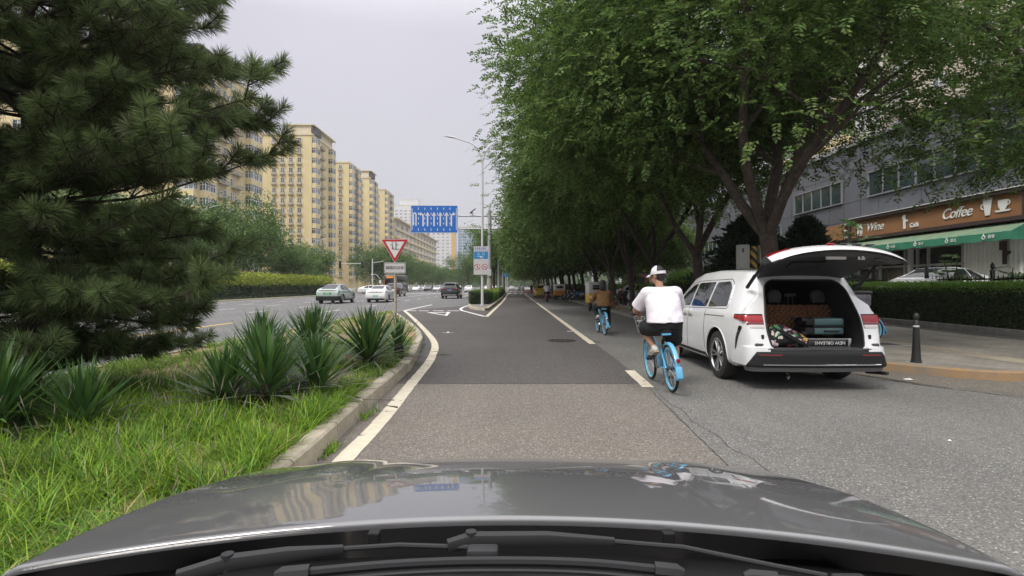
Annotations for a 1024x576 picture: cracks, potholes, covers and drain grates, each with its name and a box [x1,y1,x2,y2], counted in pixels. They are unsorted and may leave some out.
crack [597,345,769,471]
